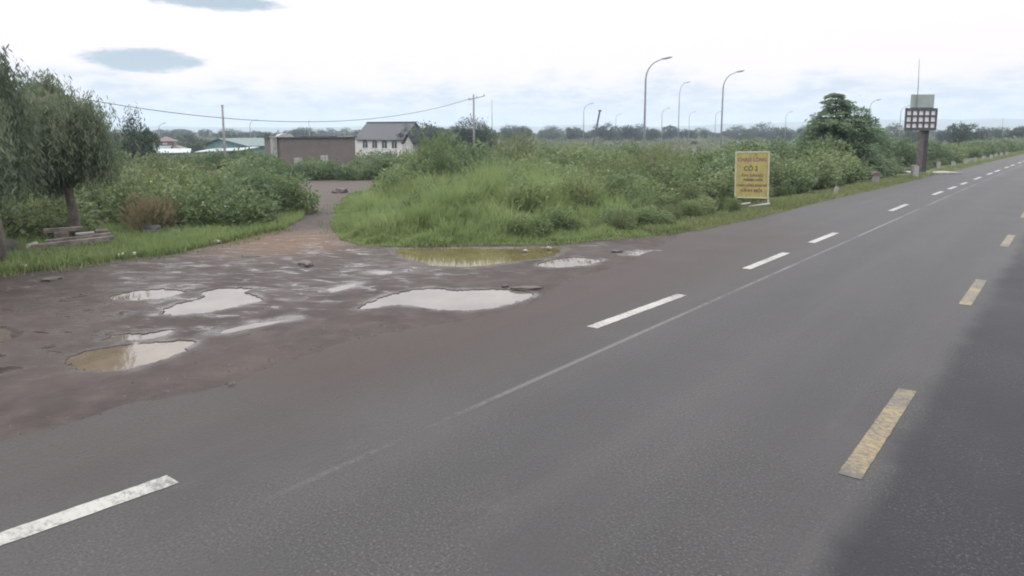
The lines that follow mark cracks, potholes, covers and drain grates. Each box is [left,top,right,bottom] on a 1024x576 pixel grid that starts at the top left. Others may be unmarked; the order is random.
pothole [537,257,602,268]
pothole [358,288,534,311]
pothole [162,287,263,315]
pothole [64,339,196,372]
pothole [108,288,187,301]
